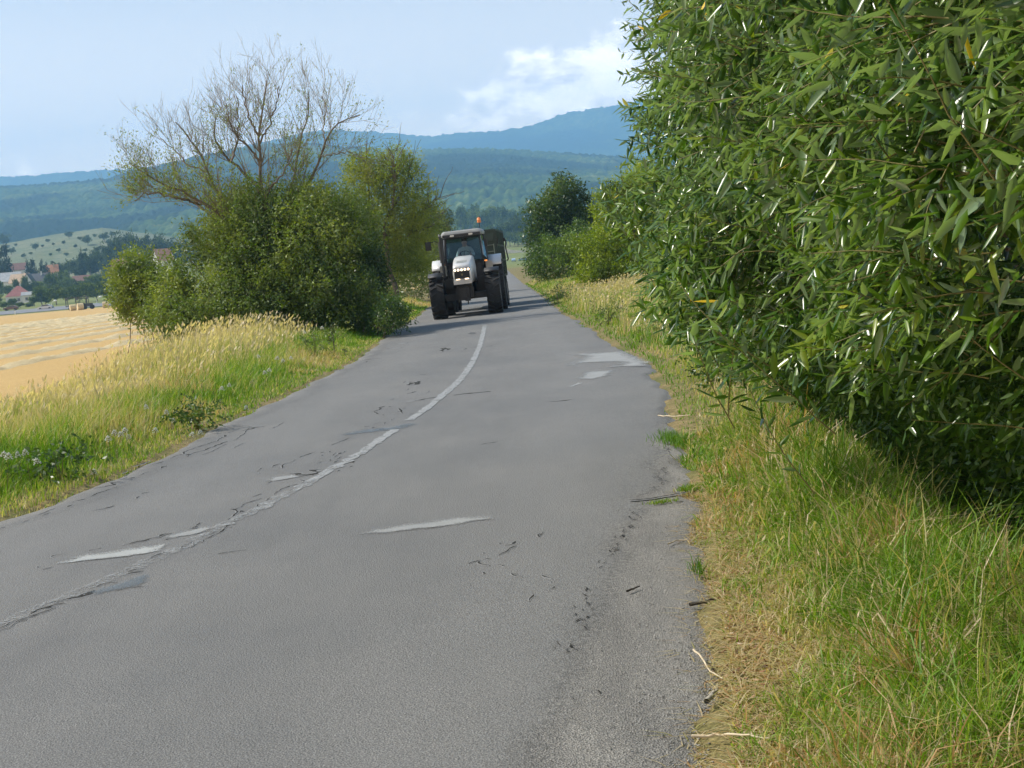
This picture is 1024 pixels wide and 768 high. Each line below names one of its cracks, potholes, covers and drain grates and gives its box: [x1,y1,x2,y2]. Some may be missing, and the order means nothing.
crack [37,340,491,570]
crack [470,541,557,601]
crack [558,587,600,700]
